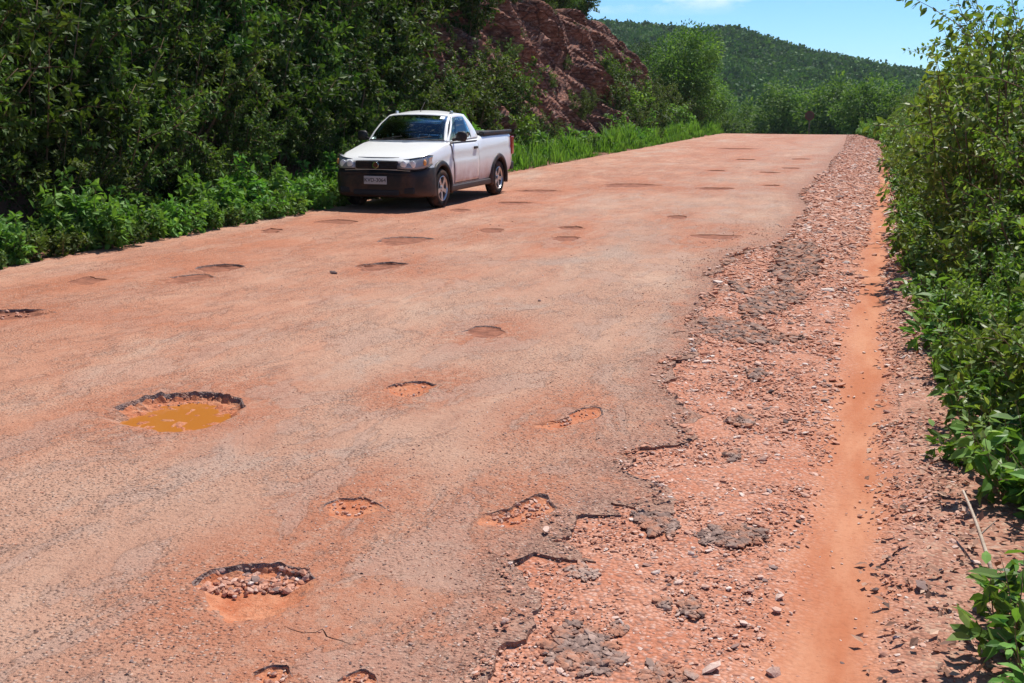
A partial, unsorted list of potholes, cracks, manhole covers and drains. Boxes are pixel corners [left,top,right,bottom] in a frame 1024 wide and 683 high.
pothole [157,274,215,284]
pothole [97,391,247,433]
pothole [335,669,379,683]
pothole [461,325,508,339]
pothole [525,406,604,431]
pothole [192,562,321,628]
pothole [468,493,557,529]
pothole [195,264,245,272]
pothole [0,309,57,320]
pothole [381,381,438,398]
pothole [354,262,409,271]
pothole [252,664,293,683]
